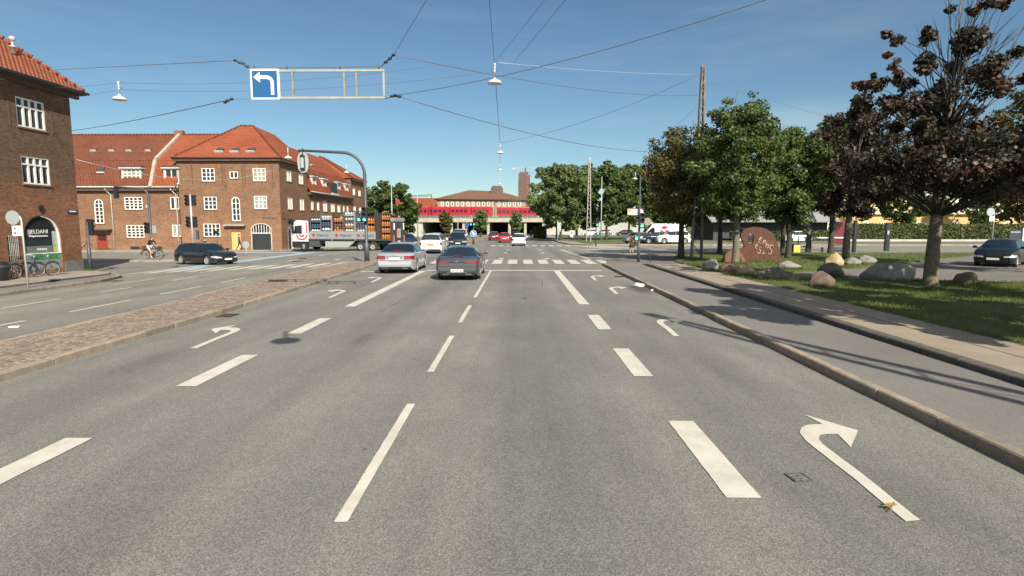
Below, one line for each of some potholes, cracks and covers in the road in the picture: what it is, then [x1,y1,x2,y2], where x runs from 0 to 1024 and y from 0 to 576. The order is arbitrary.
manhole cover [784,472,813,482]
